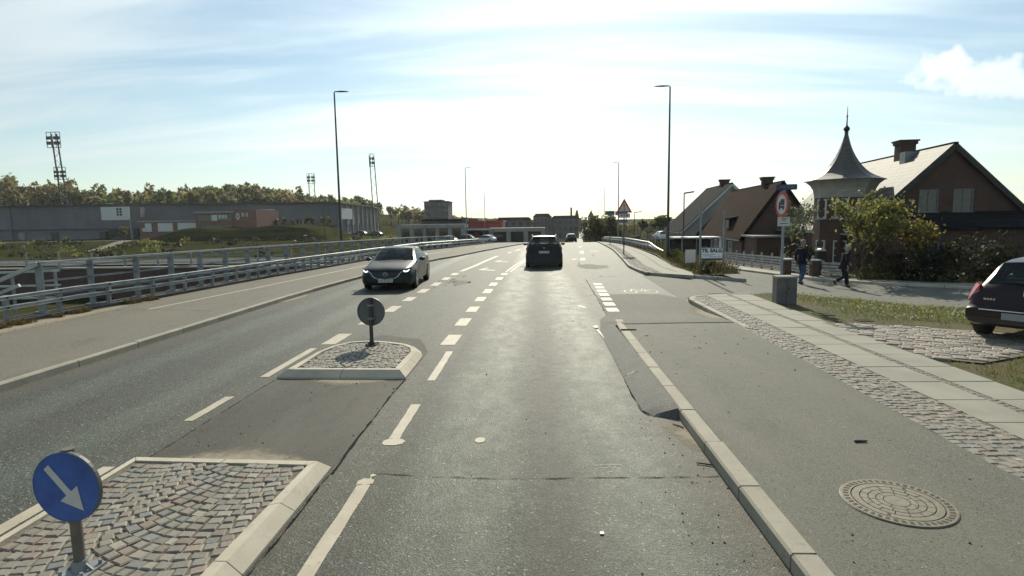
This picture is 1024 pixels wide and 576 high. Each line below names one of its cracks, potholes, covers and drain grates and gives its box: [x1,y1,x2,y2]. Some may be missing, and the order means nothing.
manhole cover [839,479,960,529]
